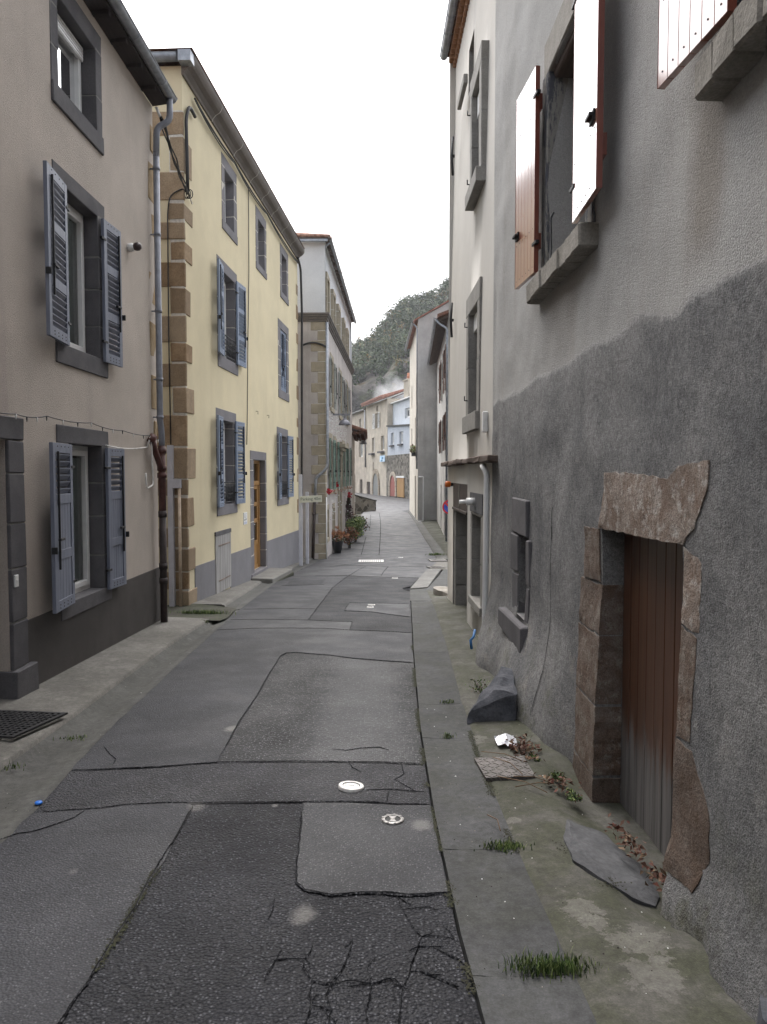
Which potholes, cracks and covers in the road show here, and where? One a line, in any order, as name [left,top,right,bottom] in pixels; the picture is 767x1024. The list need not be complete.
manhole cover [338,781,364,793]
manhole cover [381,814,404,825]
crack [0,747,467,1024]
